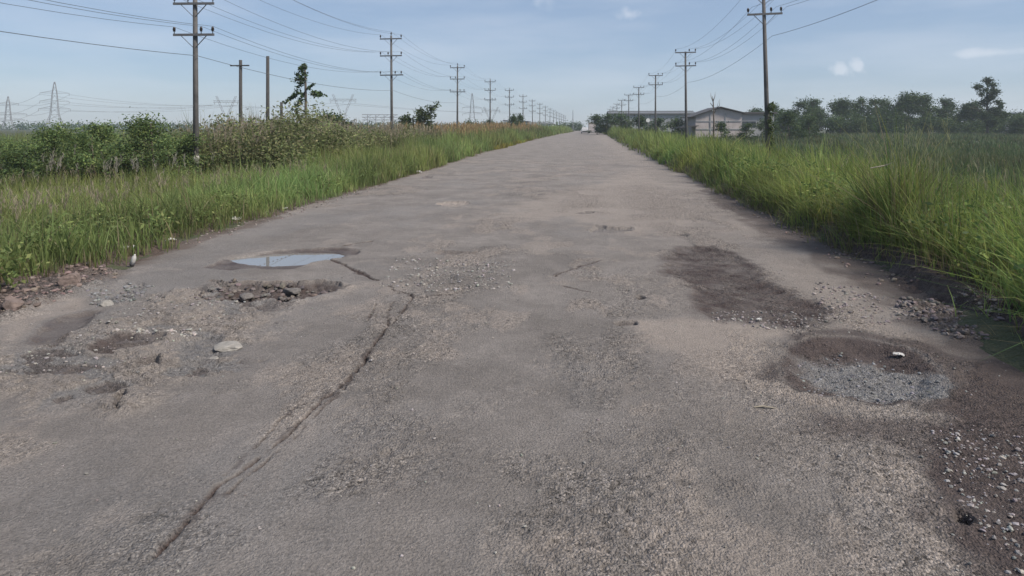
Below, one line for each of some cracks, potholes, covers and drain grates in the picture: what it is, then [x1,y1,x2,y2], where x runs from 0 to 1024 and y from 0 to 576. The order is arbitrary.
crack [553,260,602,292]
pothole [584,224,635,234]
pothole [20,309,108,349]
pothole [773,333,958,407]
pothole [200,247,362,271]
pothole [85,330,169,354]
pothole [208,279,352,304]
crack [149,241,452,559]
